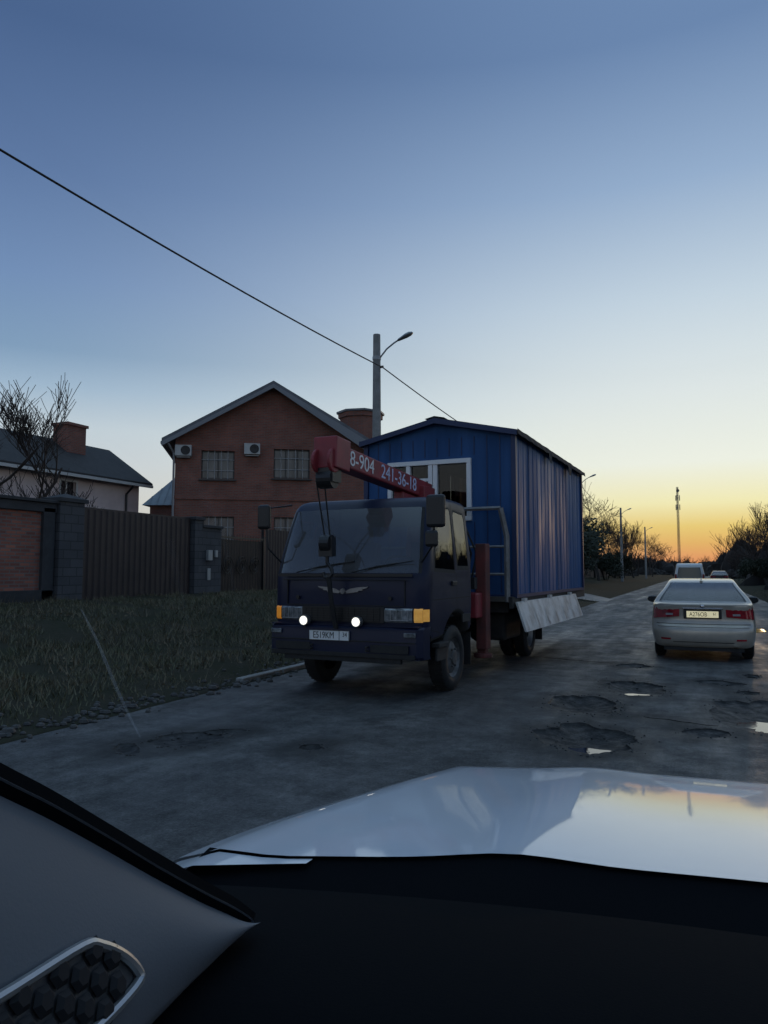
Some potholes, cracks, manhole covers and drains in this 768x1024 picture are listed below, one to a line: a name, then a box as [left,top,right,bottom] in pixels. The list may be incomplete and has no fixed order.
pothole [140,729,235,750]
pothole [298,743,328,752]
pothole [541,694,633,717]
pothole [598,679,676,697]
pothole [704,697,768,735]
pothole [111,741,140,756]
pothole [525,721,661,757]
pothole [675,727,737,738]
pothole [695,678,747,686]
